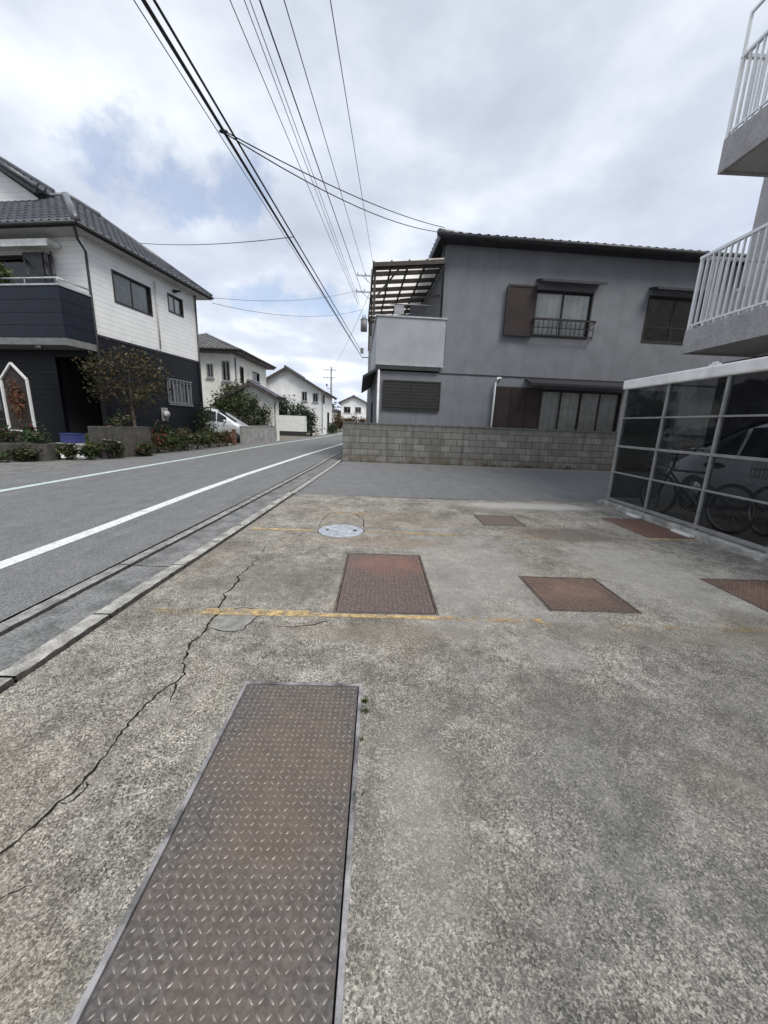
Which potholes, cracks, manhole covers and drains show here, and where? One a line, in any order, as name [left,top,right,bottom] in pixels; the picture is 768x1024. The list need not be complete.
manhole cover [314,524,368,539]
crack [0,545,267,855]
